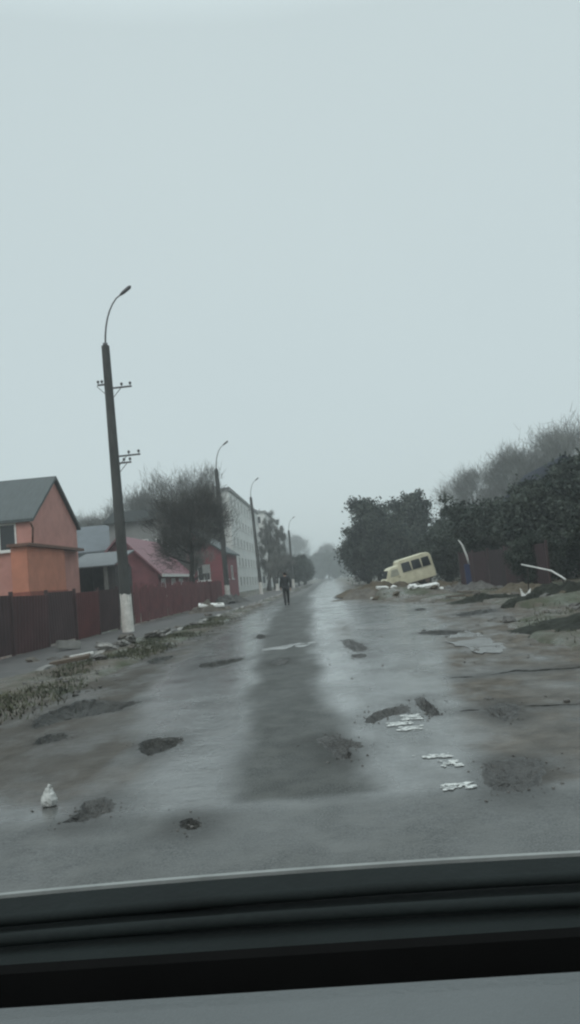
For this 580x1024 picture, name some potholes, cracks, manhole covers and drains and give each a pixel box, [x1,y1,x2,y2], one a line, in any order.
crack [492,667,580,675]
pothole [316,736,364,760]
pothole [414,697,441,716]
pothole [179,818,201,830]
pothole [33,733,68,745]
pothole [30,699,142,729]
pothole [365,706,411,723]
pothole [199,658,242,668]
pothole [342,639,367,652]
pothole [62,797,117,823]
pothole [481,757,548,792]
pothole [138,737,182,756]
